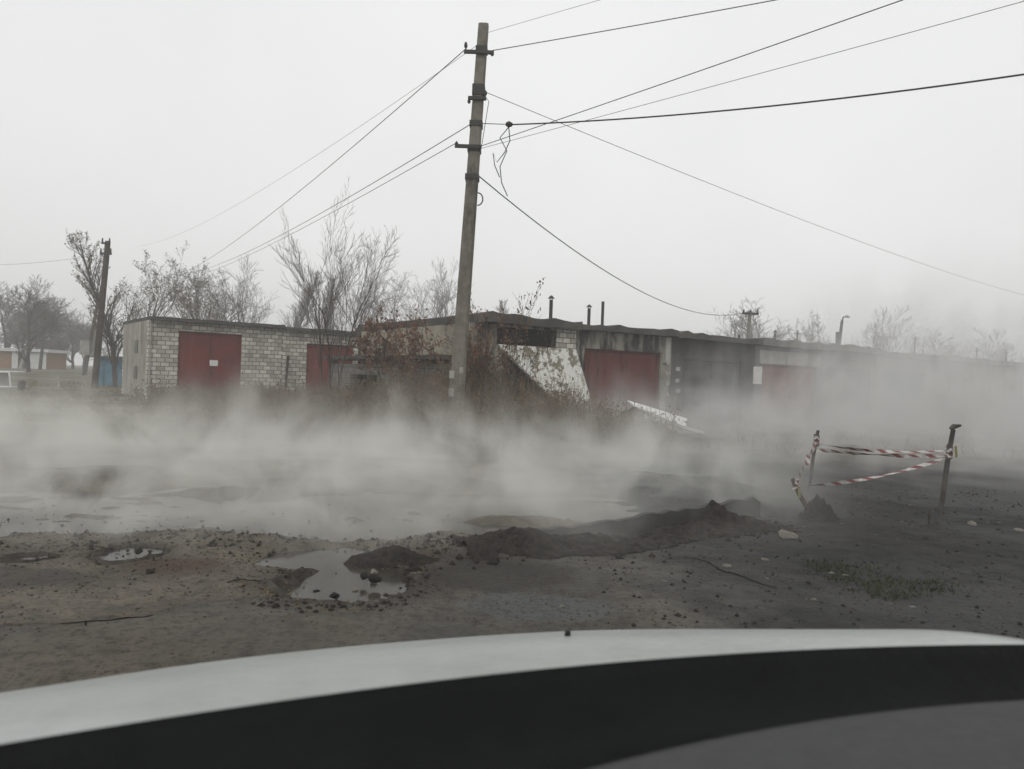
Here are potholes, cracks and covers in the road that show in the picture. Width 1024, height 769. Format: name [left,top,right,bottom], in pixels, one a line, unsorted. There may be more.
pothole [262,564,421,606]
pothole [88,543,170,565]
pothole [0,551,60,563]
